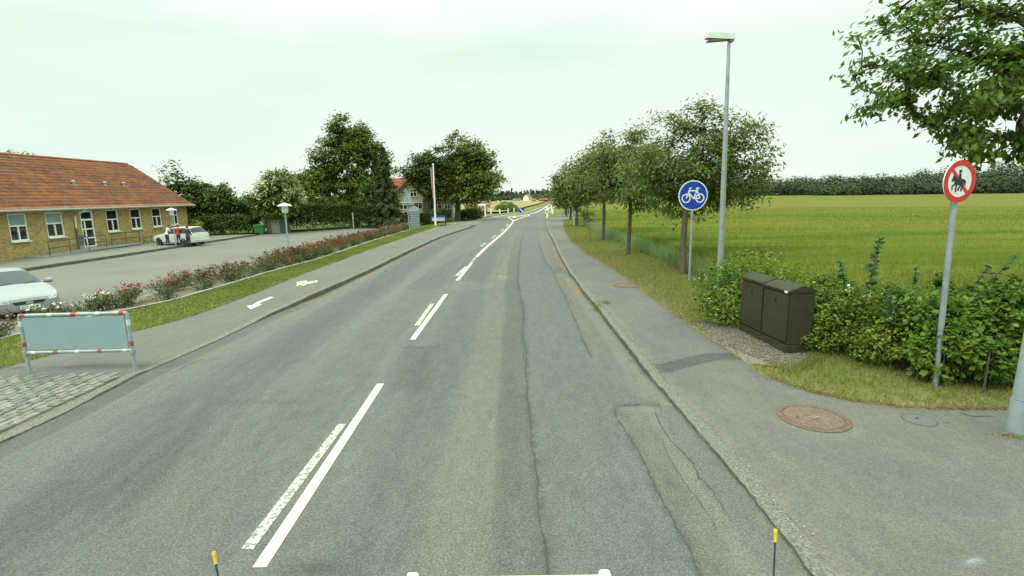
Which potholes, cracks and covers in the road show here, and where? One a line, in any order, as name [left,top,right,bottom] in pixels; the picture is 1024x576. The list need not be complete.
crack [536,226,727,576]
manhole cover [901,413,939,427]
manhole cover [776,404,852,433]
